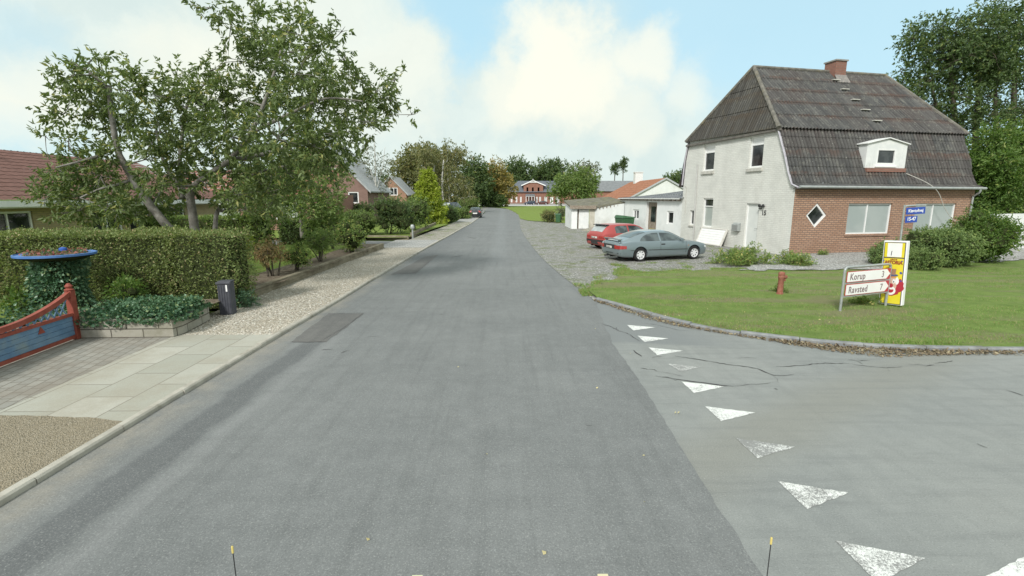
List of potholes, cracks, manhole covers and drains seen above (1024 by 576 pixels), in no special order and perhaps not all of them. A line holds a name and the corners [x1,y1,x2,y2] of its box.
crack [608,323,903,389]
